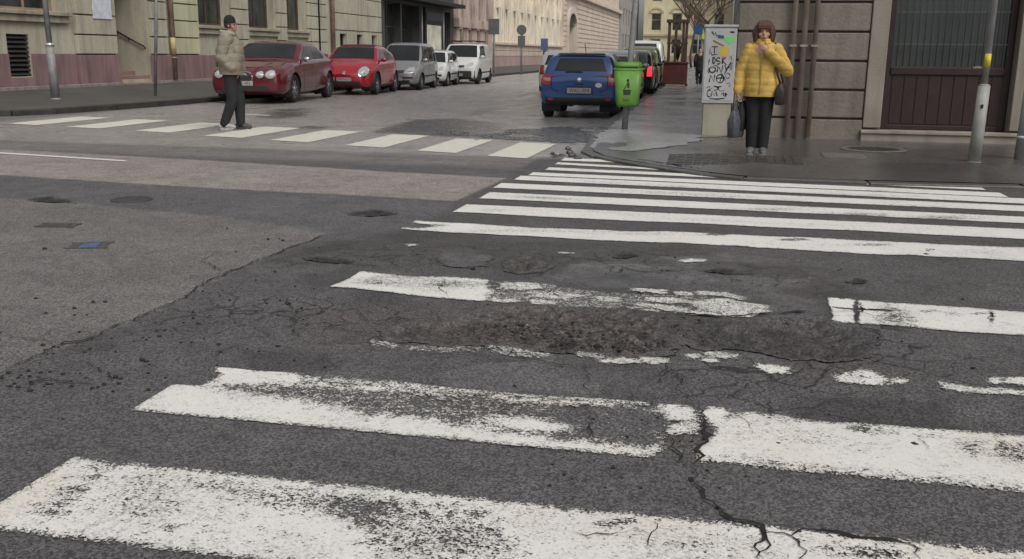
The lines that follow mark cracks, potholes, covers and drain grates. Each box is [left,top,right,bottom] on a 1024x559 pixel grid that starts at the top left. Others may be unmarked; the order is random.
crack [191,300,422,340]
crack [668,363,921,559]
pothole [347,209,397,217]
pothole [500,255,555,274]
pothole [434,251,495,268]
